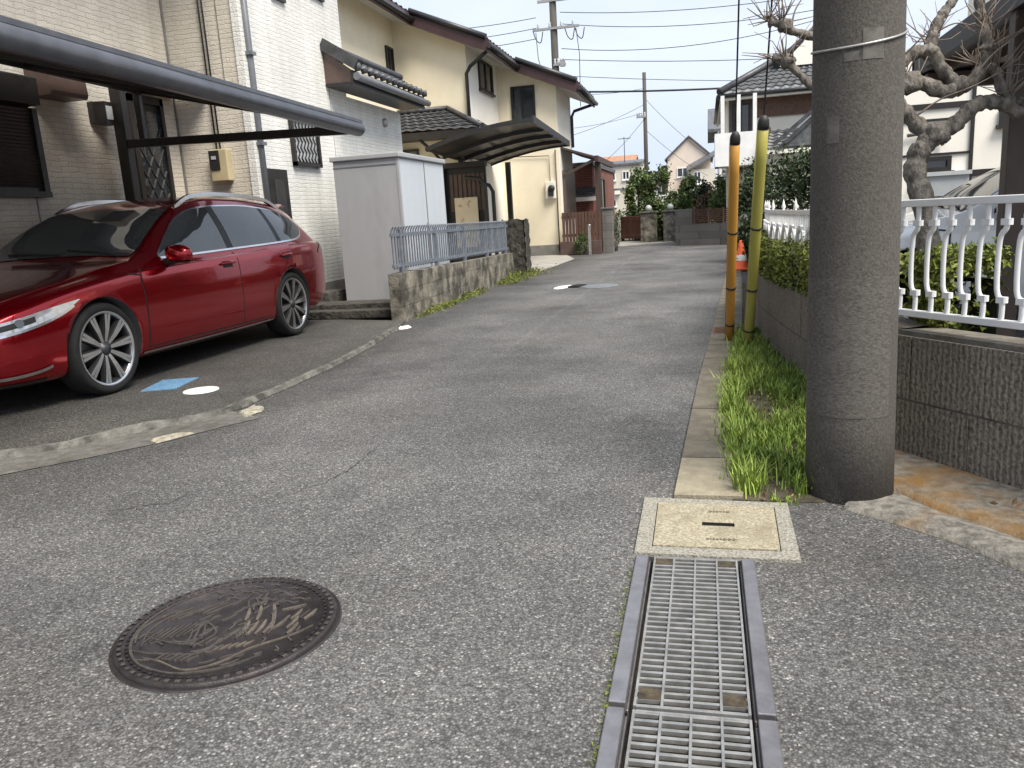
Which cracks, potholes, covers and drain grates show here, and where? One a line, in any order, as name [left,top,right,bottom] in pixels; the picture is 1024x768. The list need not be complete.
manhole cover [108,577,342,693]
drain grate [608,555,777,734]
drain grate [595,706,784,768]
